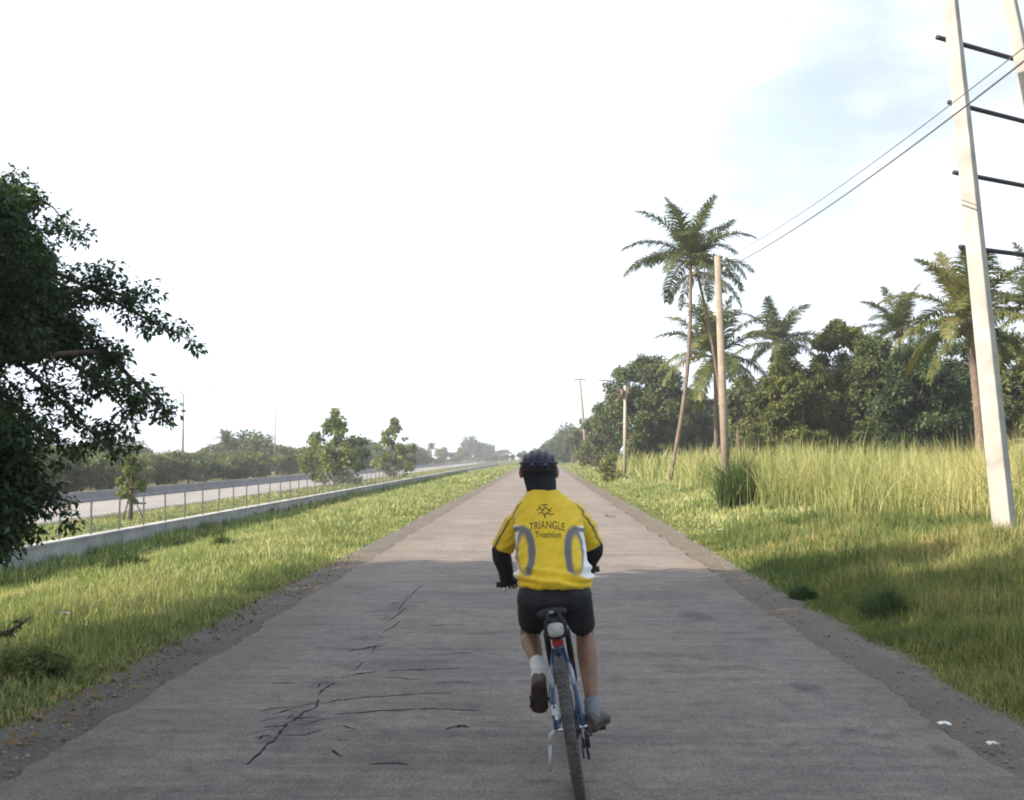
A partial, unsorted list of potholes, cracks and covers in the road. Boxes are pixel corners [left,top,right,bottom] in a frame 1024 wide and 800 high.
crack [246,585,479,764]
